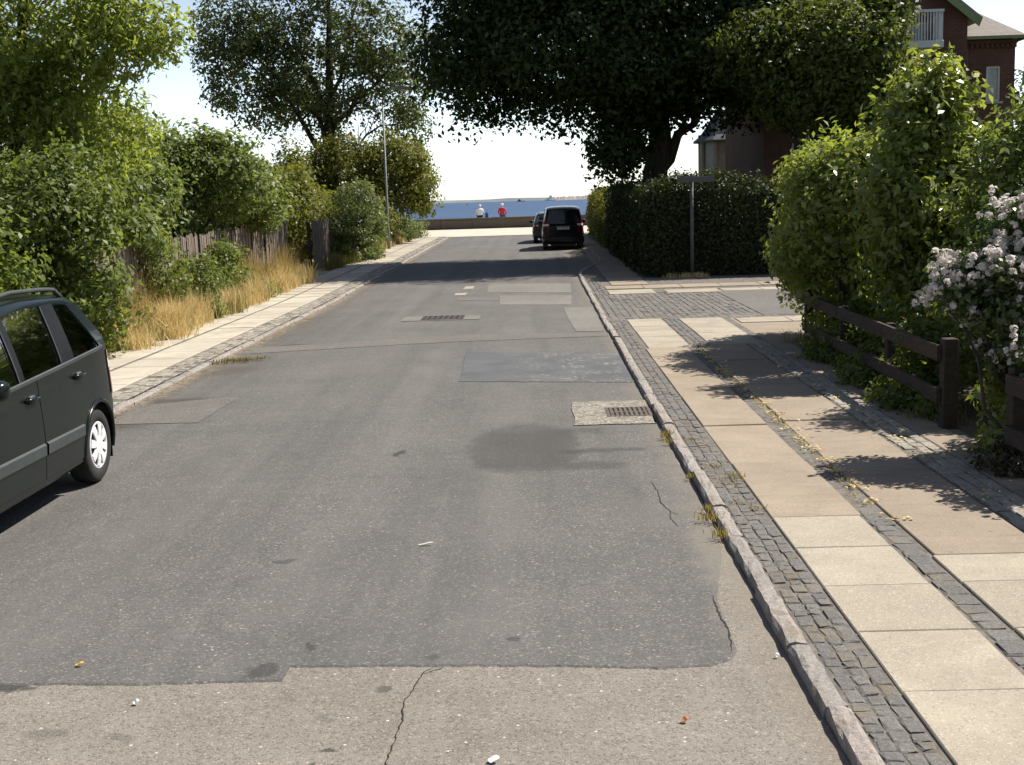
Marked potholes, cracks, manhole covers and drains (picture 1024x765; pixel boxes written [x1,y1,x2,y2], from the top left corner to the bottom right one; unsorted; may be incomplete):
crack [712,595,732,651]
crack [385,666,443,765]
